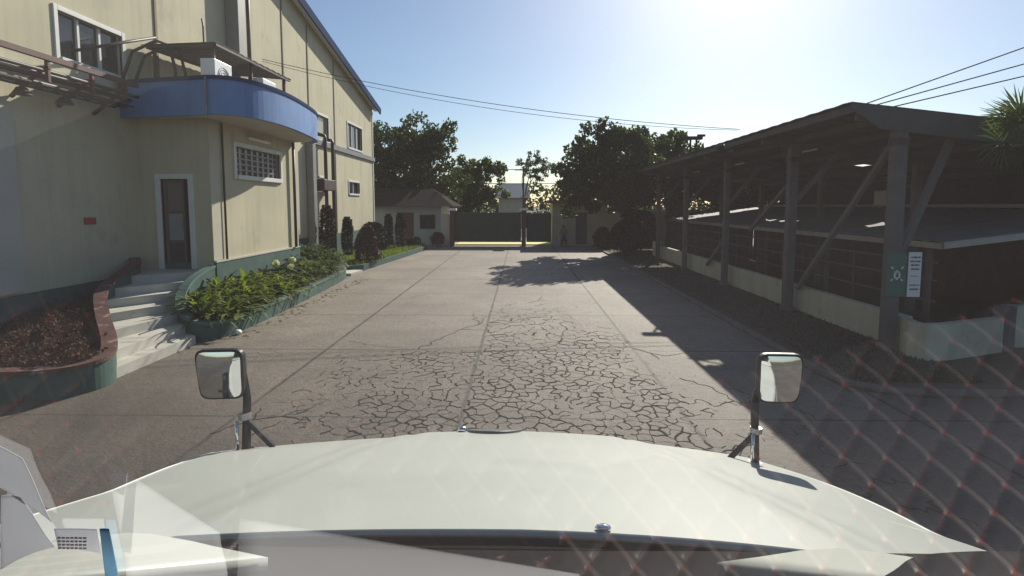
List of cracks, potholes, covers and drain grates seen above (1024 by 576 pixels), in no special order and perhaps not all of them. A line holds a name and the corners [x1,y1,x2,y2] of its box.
crack [210,300,988,532]
